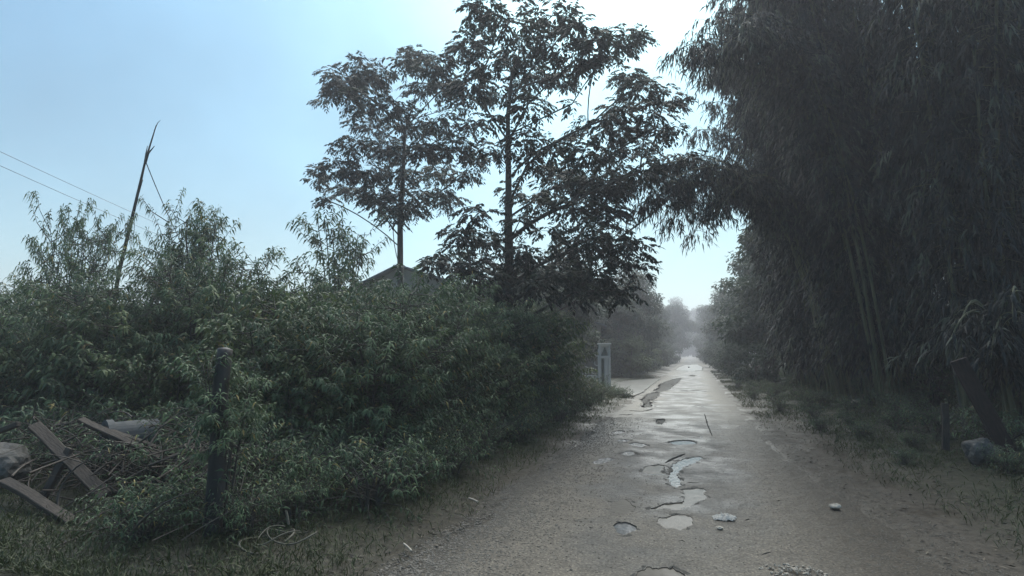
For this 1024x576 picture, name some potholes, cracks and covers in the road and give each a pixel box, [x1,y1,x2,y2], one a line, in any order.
pothole [645,486,711,511]
pothole [639,391,662,408]
pothole [613,521,640,537]
pothole [654,513,698,530]
pothole [661,456,706,489]
pothole [653,378,684,392]
pothole [630,565,691,576]
pothole [639,464,673,475]
